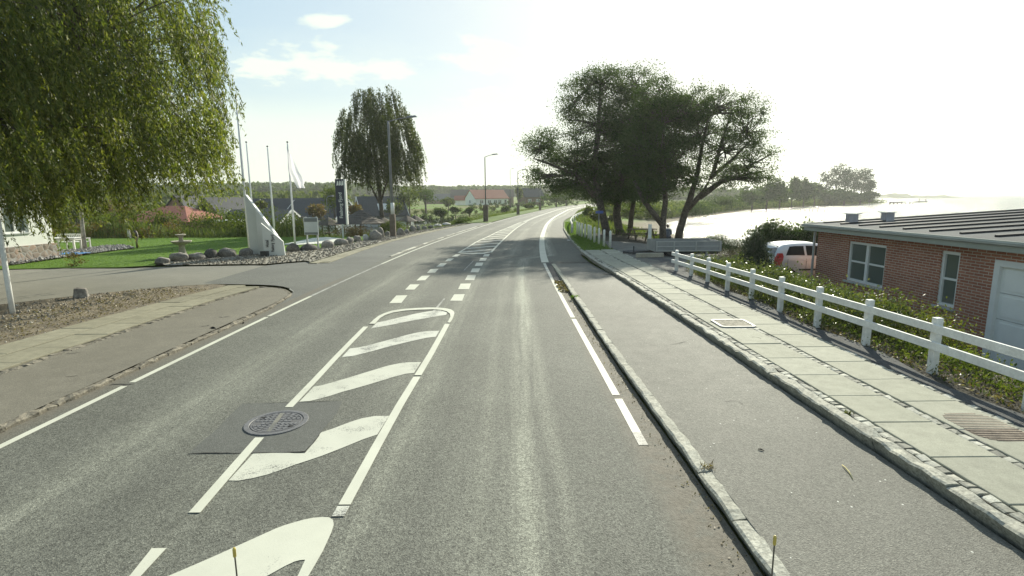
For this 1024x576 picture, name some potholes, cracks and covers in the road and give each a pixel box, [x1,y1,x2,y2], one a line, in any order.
manhole cover [710,319,760,330]
manhole cover [243,410,309,436]
